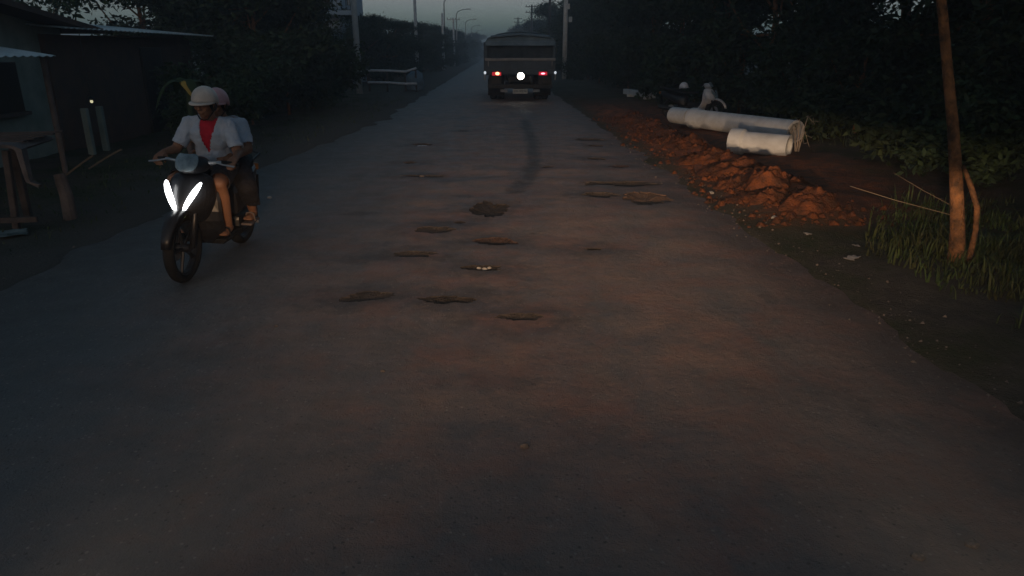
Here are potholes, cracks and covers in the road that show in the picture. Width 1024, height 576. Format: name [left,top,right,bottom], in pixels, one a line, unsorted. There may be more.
pothole [417,296,478,304]
pothole [494,313,543,321]
pothole [339,291,396,302]
pothole [415,226,456,234]
pothole [622,191,673,205]
pothole [469,200,510,218]
pothole [472,237,519,245]
